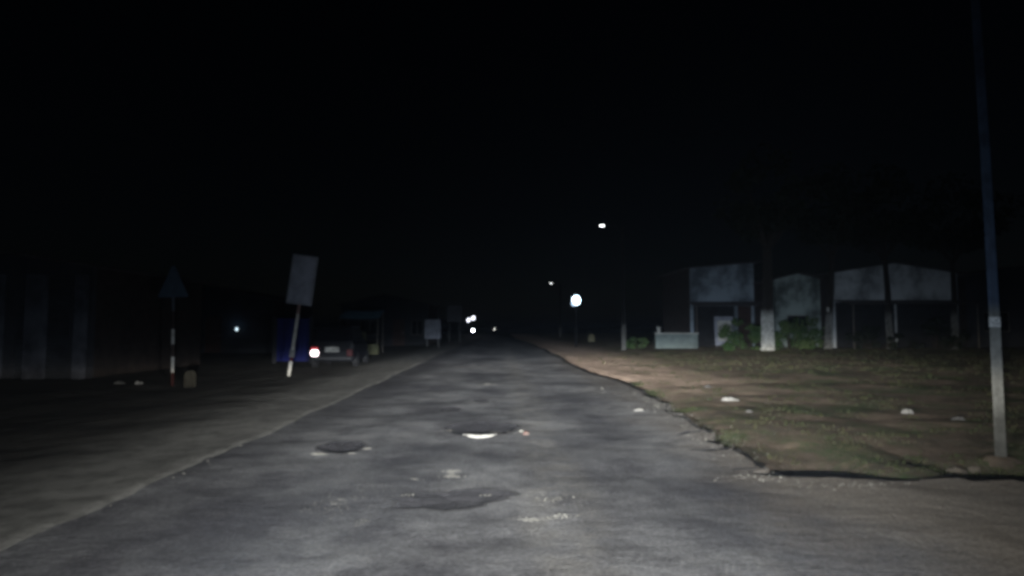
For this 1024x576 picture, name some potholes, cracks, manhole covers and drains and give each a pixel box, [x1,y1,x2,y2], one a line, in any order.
pothole [383,487,521,512]
pothole [439,420,522,438]
pothole [312,441,371,455]
